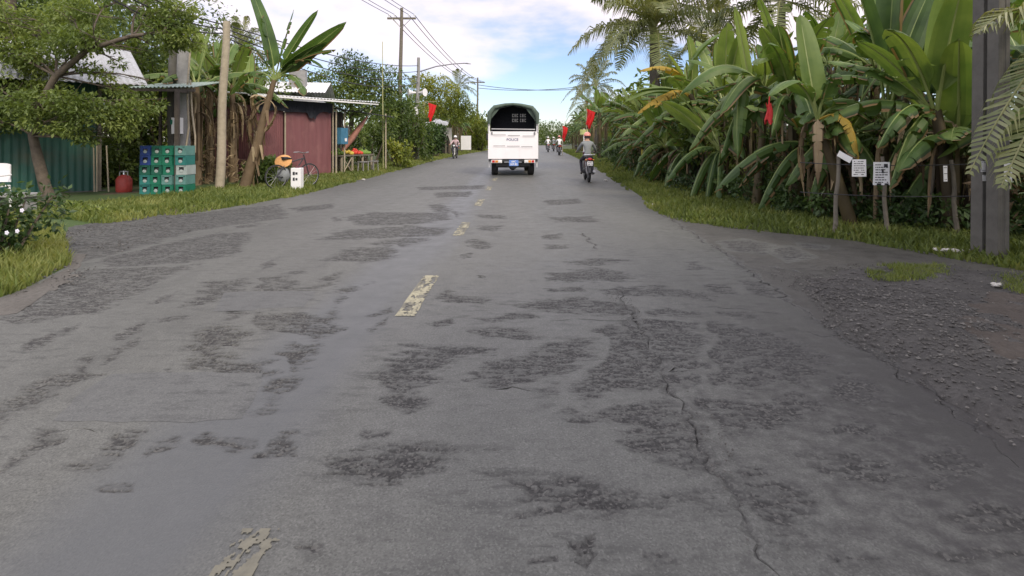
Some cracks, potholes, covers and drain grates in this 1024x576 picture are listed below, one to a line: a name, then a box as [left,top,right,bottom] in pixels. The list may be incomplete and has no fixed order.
pothole [477,465,754,531]
pothole [300,435,513,508]
pothole [91,481,137,495]
pothole [360,340,502,420]
crack [547,292,780,576]
pothole [173,319,288,379]
